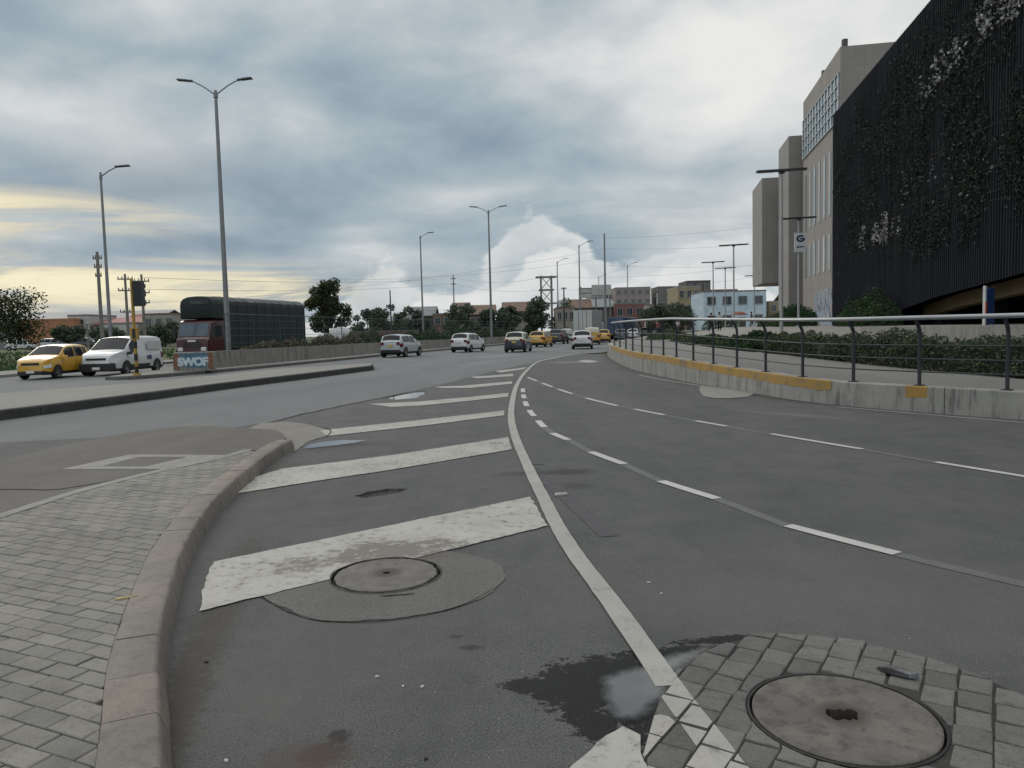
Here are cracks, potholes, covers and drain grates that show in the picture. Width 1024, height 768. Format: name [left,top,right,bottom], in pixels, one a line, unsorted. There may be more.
manhole cover [328,557,443,594]
pothole [355,488,406,498]
manhole cover [747,674,950,768]
